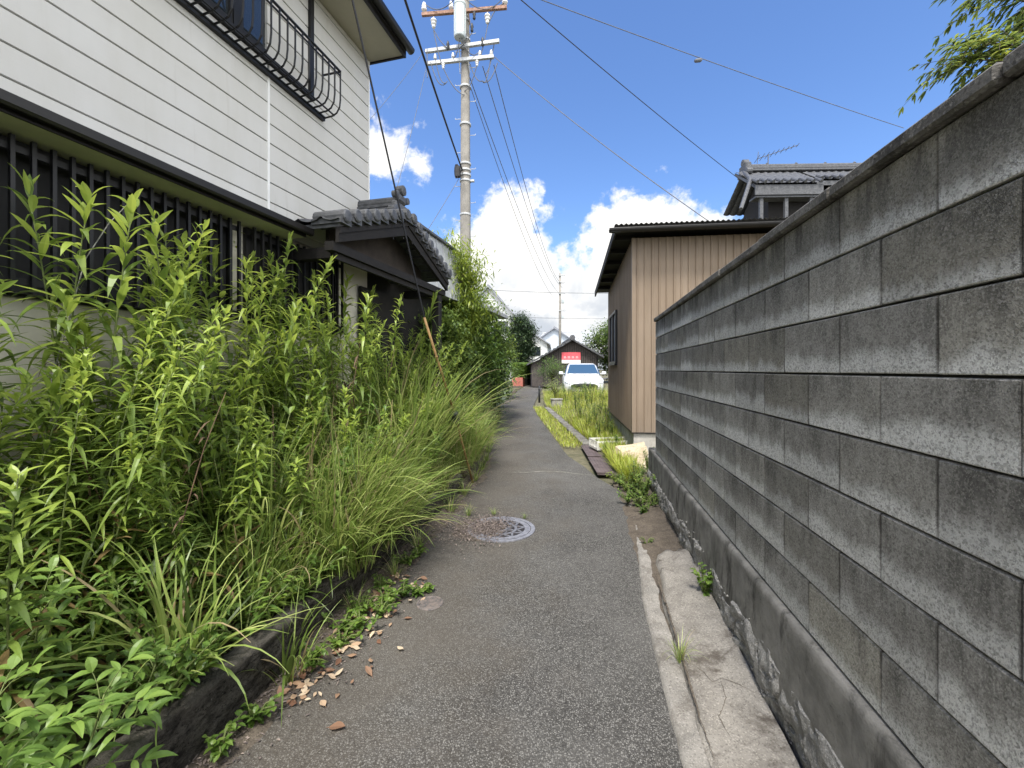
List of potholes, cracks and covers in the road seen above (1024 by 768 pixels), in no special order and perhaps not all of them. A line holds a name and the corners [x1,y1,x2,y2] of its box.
manhole cover [468,516,535,543]
